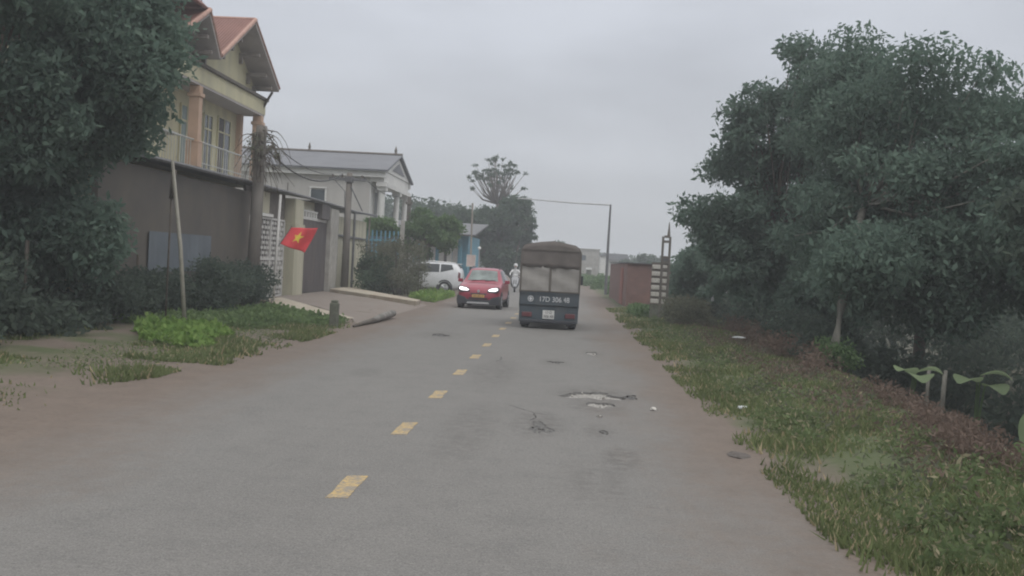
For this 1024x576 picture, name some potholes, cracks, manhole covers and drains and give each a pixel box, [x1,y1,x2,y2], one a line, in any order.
pothole [557,392,625,400]
